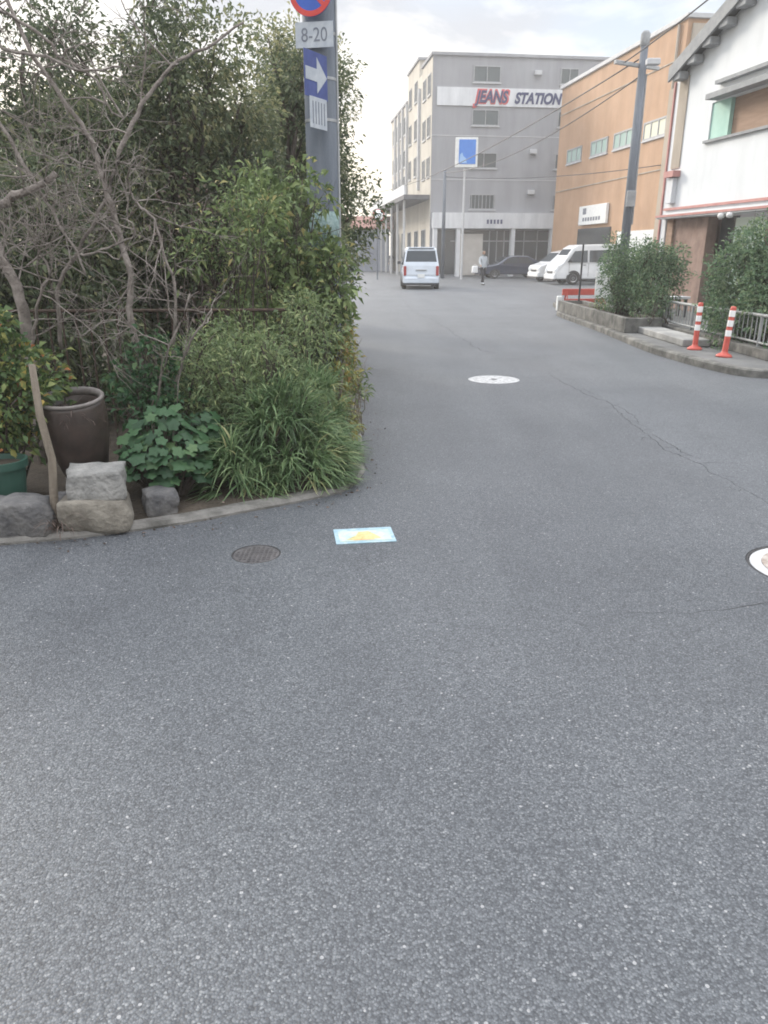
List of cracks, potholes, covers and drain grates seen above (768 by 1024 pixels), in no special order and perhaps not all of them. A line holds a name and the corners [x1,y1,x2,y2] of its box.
manhole cover [468,375,520,384]
crack [628,602,768,614]
crack [549,373,762,499]
manhole cover [745,546,768,577]
manhole cover [231,545,281,564]
